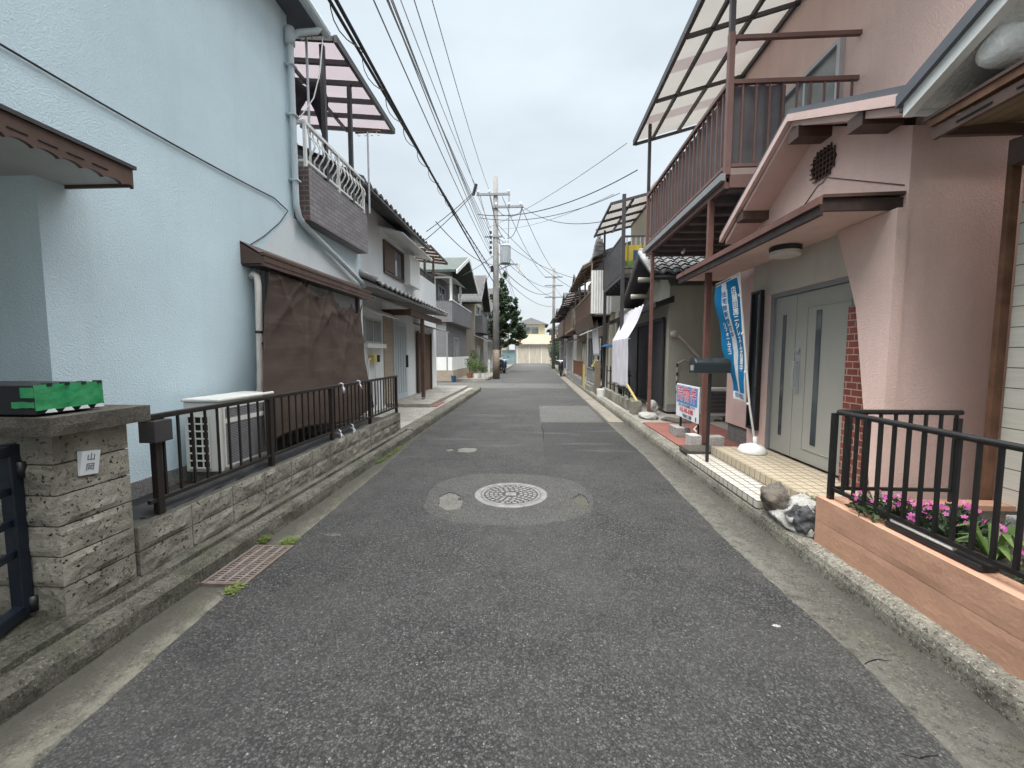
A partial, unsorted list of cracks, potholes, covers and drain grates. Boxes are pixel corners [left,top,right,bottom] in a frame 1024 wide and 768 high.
drain grate [195,544,294,589]
pothole [572,494,590,510]
manhole cover [475,483,547,508]
